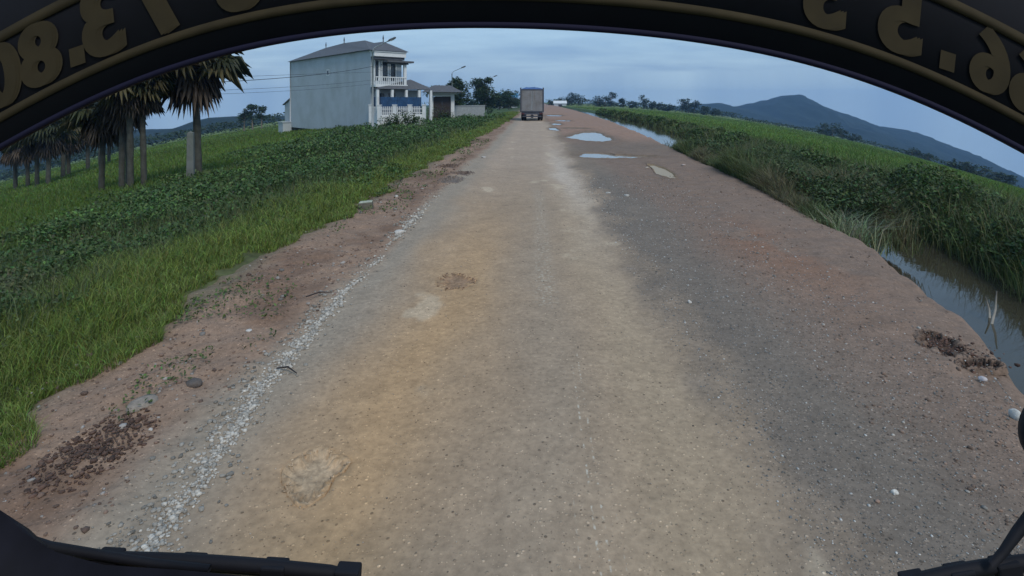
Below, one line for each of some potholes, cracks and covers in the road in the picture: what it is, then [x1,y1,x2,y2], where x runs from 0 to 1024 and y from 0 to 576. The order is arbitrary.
pothole [913,329,971,360]
pothole [434,272,477,290]
pothole [949,357,1009,376]
pothole [558,130,620,143]
